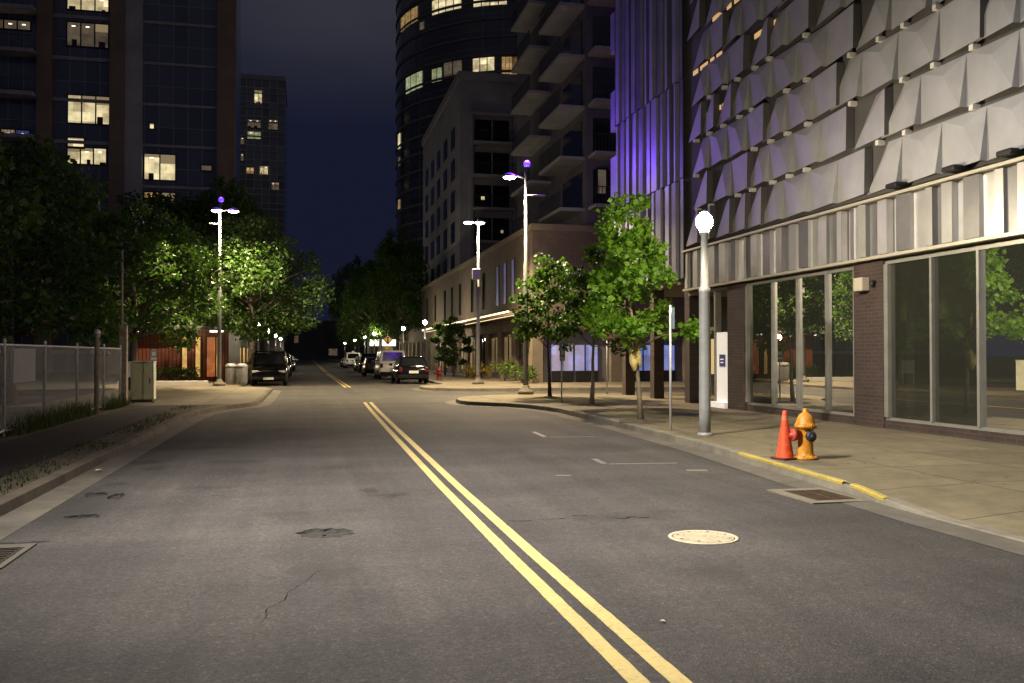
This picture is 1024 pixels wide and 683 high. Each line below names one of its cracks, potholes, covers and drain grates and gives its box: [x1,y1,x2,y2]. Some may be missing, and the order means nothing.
drain grate [0,543,37,570]
pothole [296,528,354,538]
manhole cover [668,530,739,545]
drain grate [767,488,869,504]
